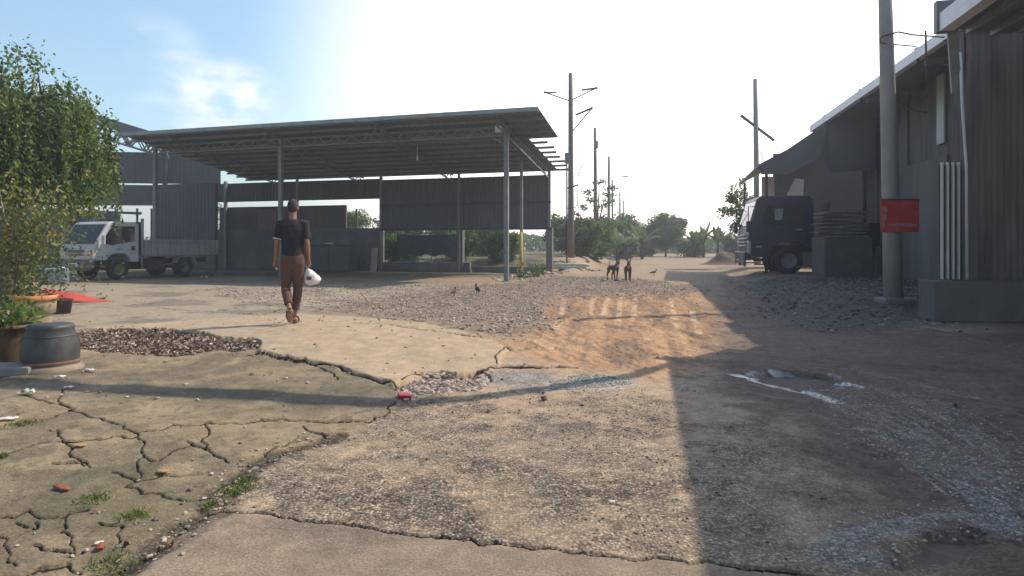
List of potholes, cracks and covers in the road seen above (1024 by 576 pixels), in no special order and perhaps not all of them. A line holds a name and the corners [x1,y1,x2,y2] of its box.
pothole [902,540,977,571]
crack [1,510,123,576]
crack [225,512,801,576]
crack [7,390,395,502]
pothole [762,376,838,392]
